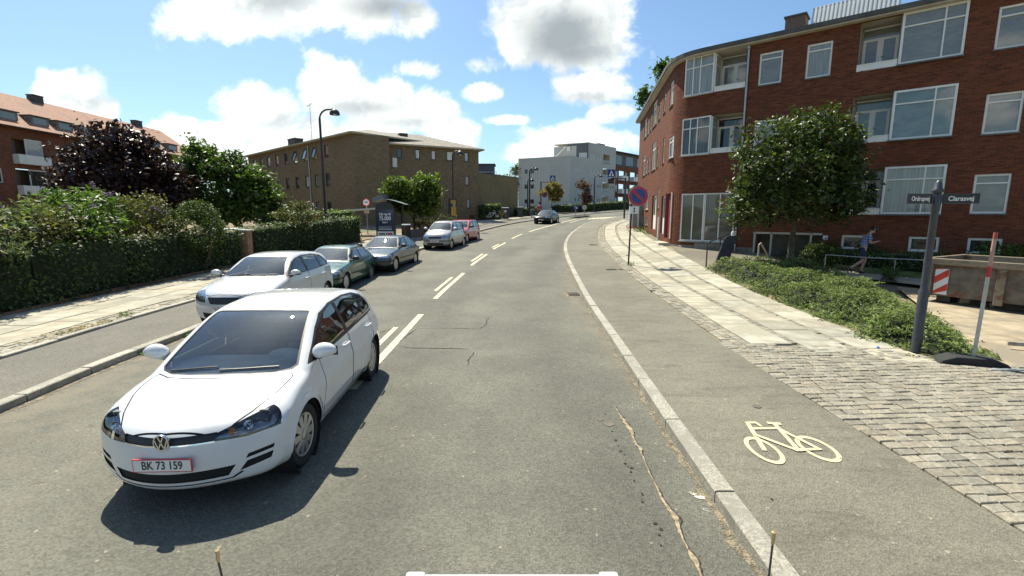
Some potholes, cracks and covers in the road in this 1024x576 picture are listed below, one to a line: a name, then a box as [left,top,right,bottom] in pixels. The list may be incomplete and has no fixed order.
crack [615,407,704,576]
